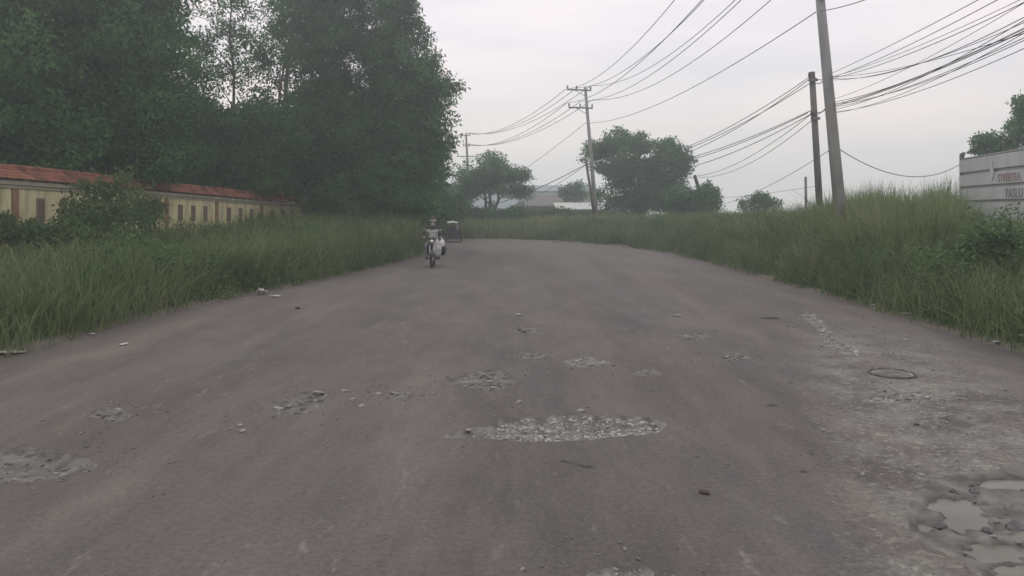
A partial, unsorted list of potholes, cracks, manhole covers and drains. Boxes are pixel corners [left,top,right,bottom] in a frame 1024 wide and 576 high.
pothole [906,468,1024,576]
pothole [0,447,98,484]
pothole [268,391,330,416]
pothole [633,369,662,377]
pothole [444,369,517,391]
pothole [90,406,131,422]
manhole cover [867,368,917,379]
pothole [439,415,667,442]
pothole [563,357,612,367]
pothole [864,391,936,403]
pothole [515,326,544,334]
